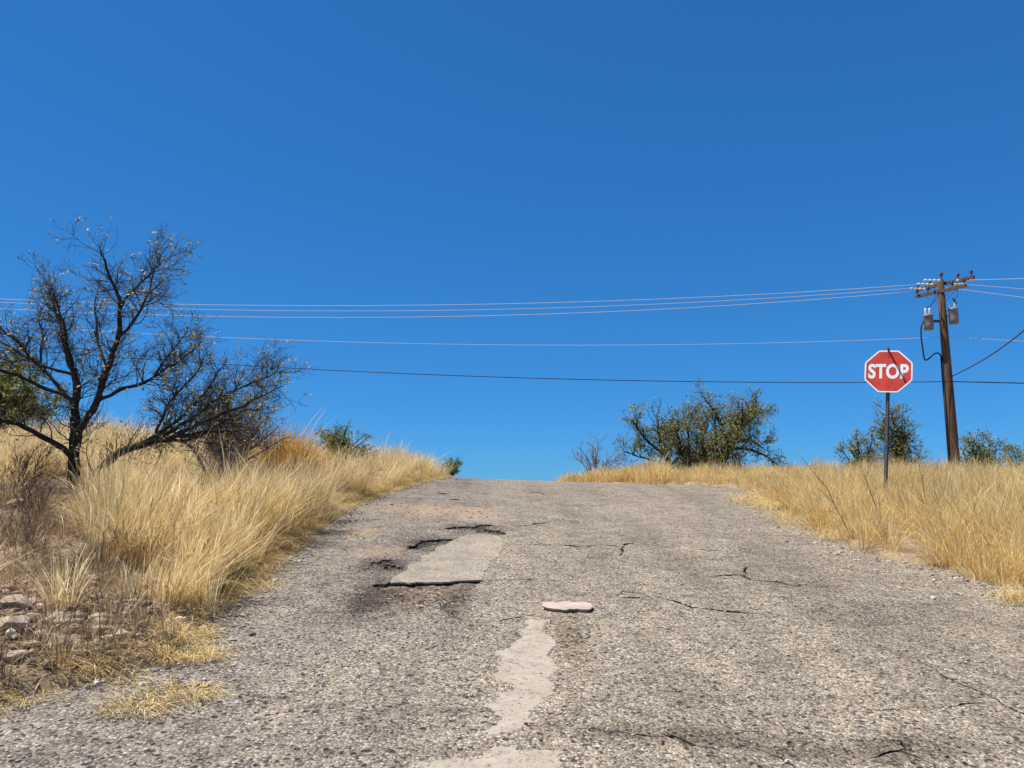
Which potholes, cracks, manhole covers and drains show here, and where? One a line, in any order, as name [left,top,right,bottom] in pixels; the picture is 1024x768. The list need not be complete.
crack [604,591,785,619]
pothole [446,524,507,535]
crack [524,543,807,586]
pothole [406,538,456,550]
crack [700,746,795,768]
crack [866,648,1024,715]
crack [872,734,936,768]
pothole [365,560,405,570]
